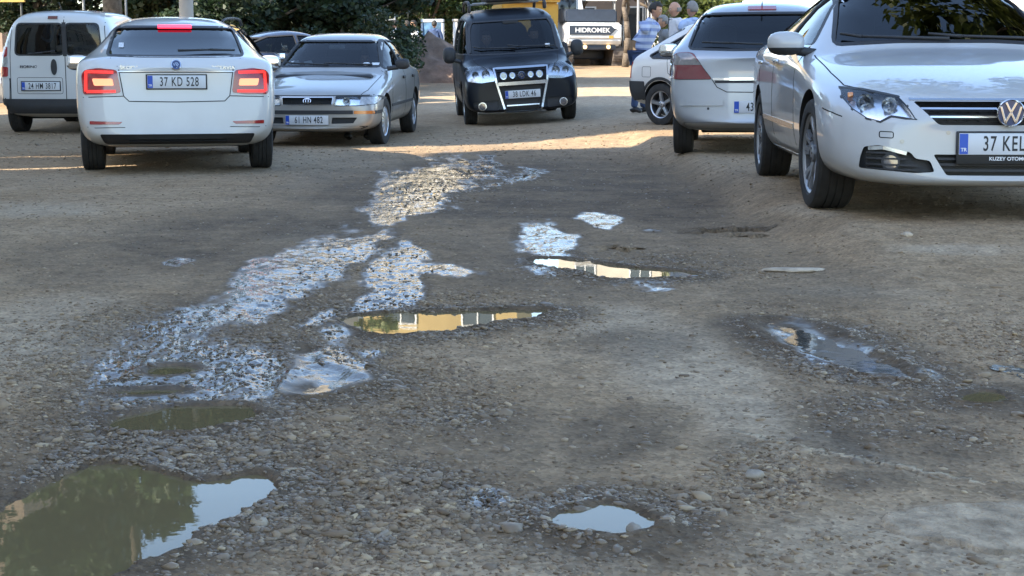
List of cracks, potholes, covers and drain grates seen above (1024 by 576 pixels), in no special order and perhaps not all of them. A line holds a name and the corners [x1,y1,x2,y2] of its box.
pothole [98,399,263,435]
pothole [742,315,929,381]
pothole [527,256,706,279]
pothole [0,456,286,576]
pothole [335,305,561,335]
pothole [537,494,670,536]
pothole [274,341,379,398]
pothole [949,387,1019,403]
